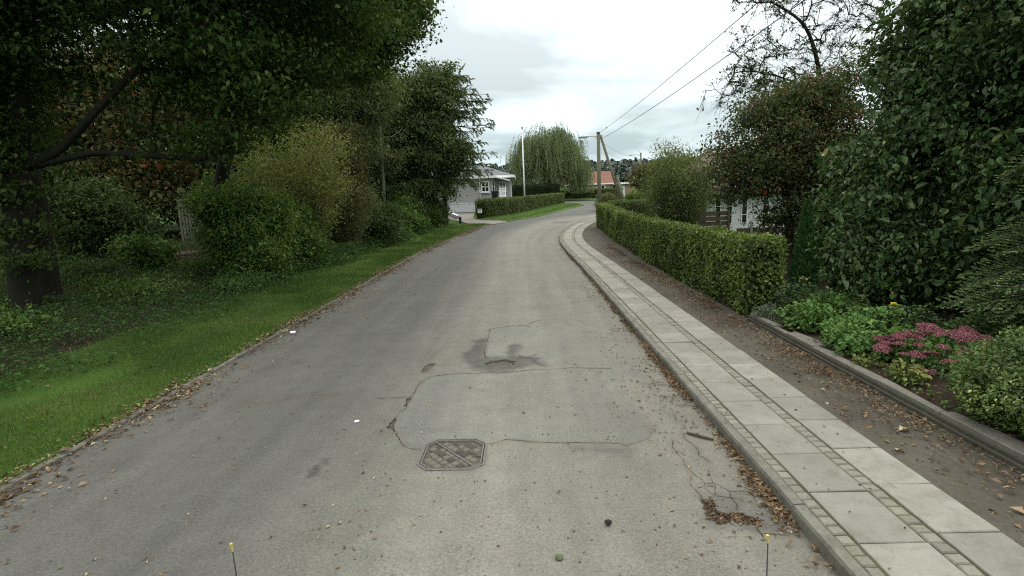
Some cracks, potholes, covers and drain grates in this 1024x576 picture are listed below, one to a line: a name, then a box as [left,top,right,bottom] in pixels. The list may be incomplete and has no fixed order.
manhole cover [417,438,487,471]
pothole [481,359,521,367]
crack [672,416,786,539]
